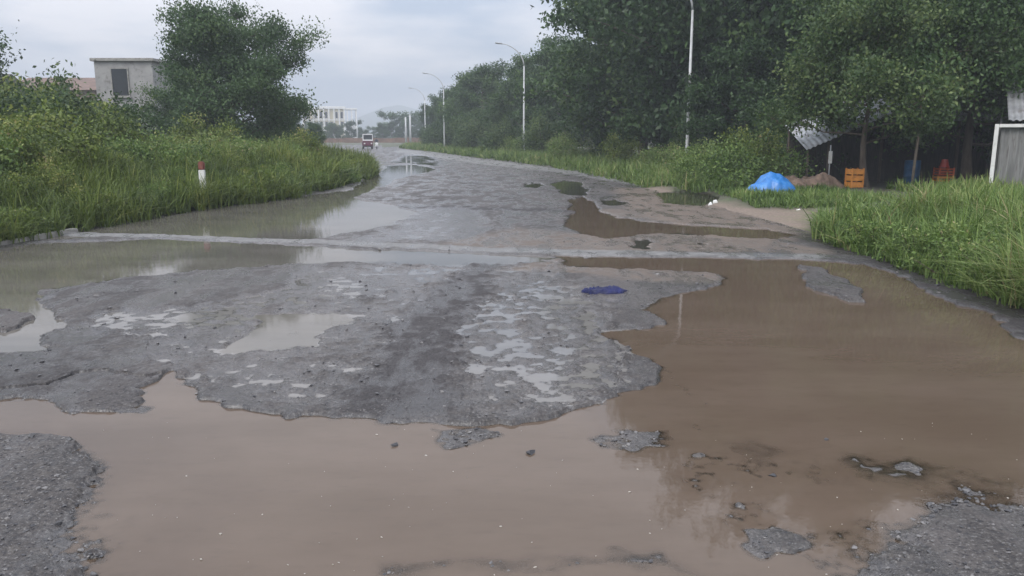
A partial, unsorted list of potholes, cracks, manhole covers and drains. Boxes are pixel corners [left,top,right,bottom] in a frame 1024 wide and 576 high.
pothole [560,195,803,240]
pothole [0,365,876,576]
pothole [549,179,591,196]
pothole [0,289,75,353]
pothole [543,251,1024,564]
pothole [625,236,665,249]
